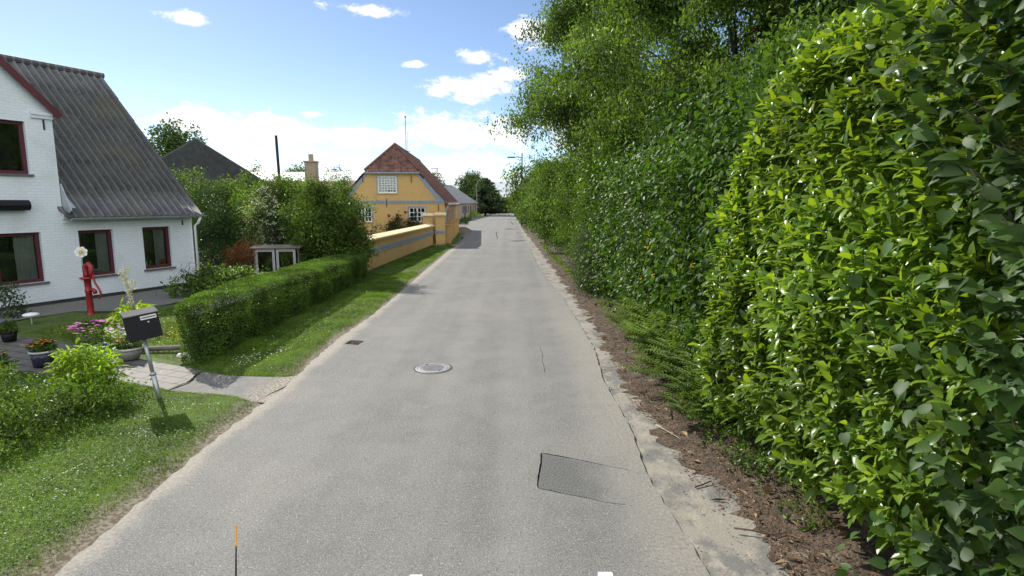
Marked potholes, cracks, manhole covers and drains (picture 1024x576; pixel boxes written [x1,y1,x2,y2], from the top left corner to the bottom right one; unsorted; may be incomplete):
manhole cover [413,363,453,374]
